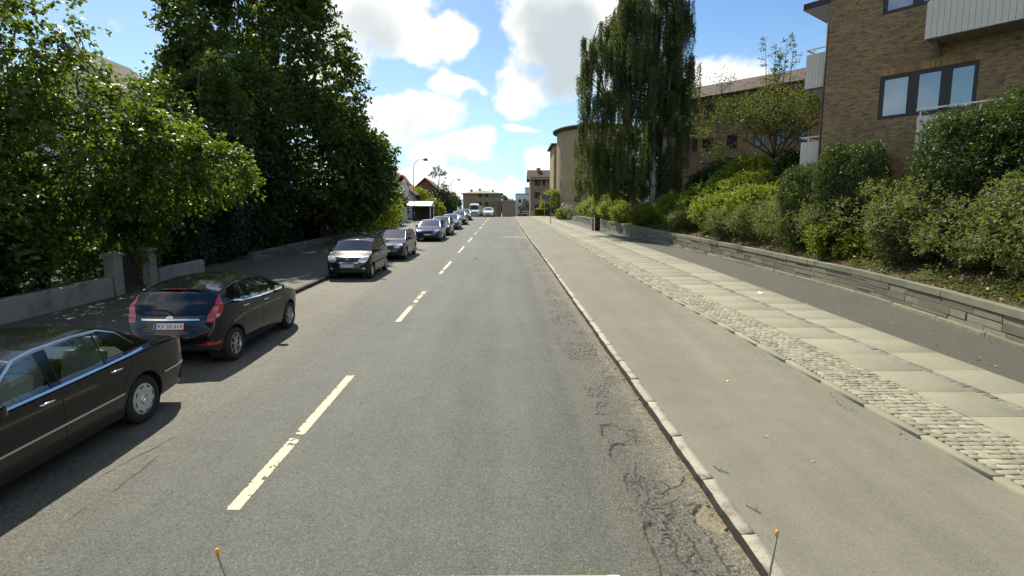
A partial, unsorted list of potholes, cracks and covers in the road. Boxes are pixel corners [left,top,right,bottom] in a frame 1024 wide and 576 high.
pothole [692,503,726,532]
crack [63,437,174,524]
crack [551,311,599,363]
crack [584,370,742,576]
